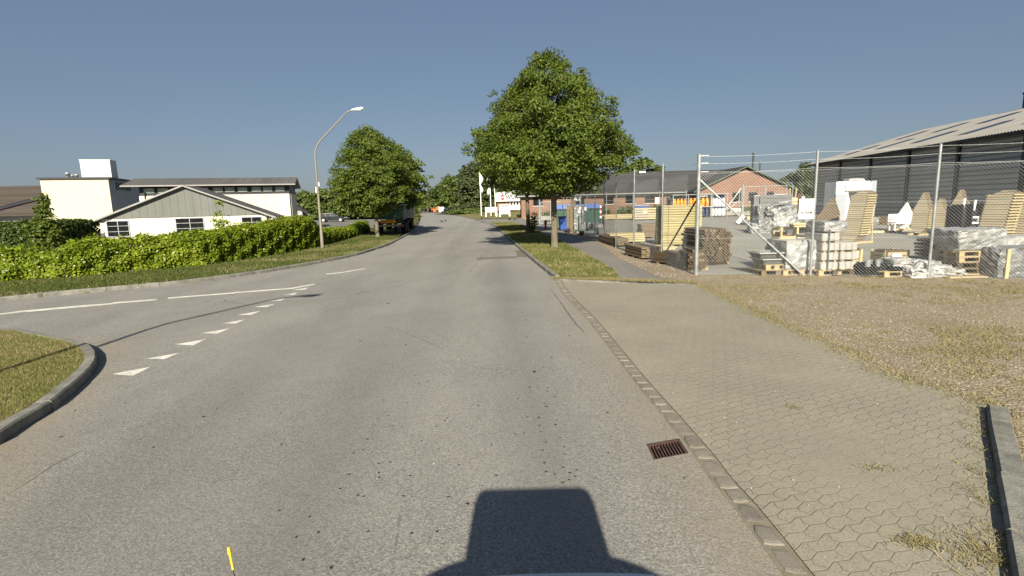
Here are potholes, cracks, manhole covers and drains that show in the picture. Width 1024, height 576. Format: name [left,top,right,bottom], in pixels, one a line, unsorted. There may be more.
drain grate [647,439,688,460]
